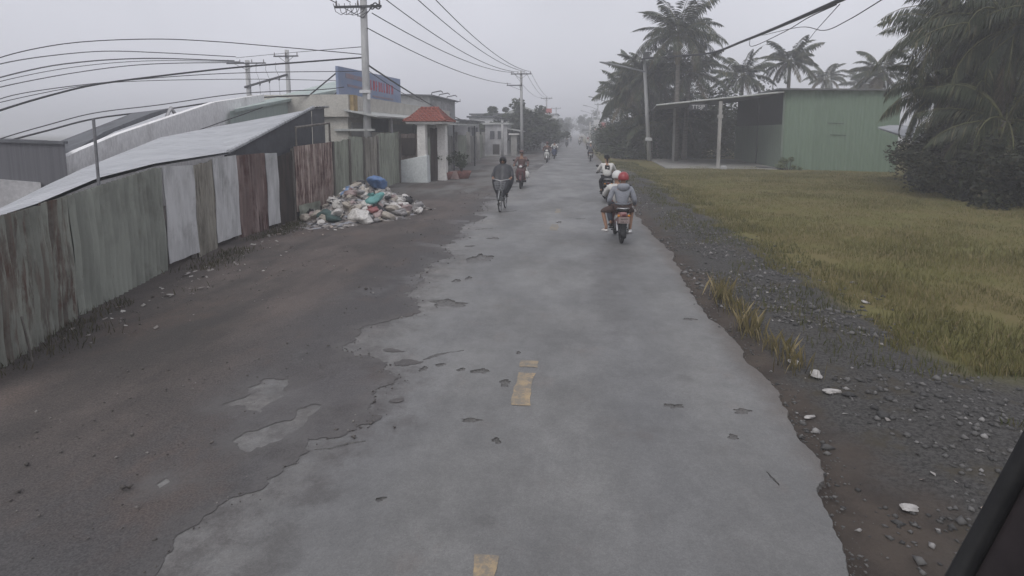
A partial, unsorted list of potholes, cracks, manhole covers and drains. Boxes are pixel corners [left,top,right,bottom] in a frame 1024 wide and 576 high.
pothole [466,253,494,263]
crack [423,350,464,360]
pothole [429,298,468,308]
